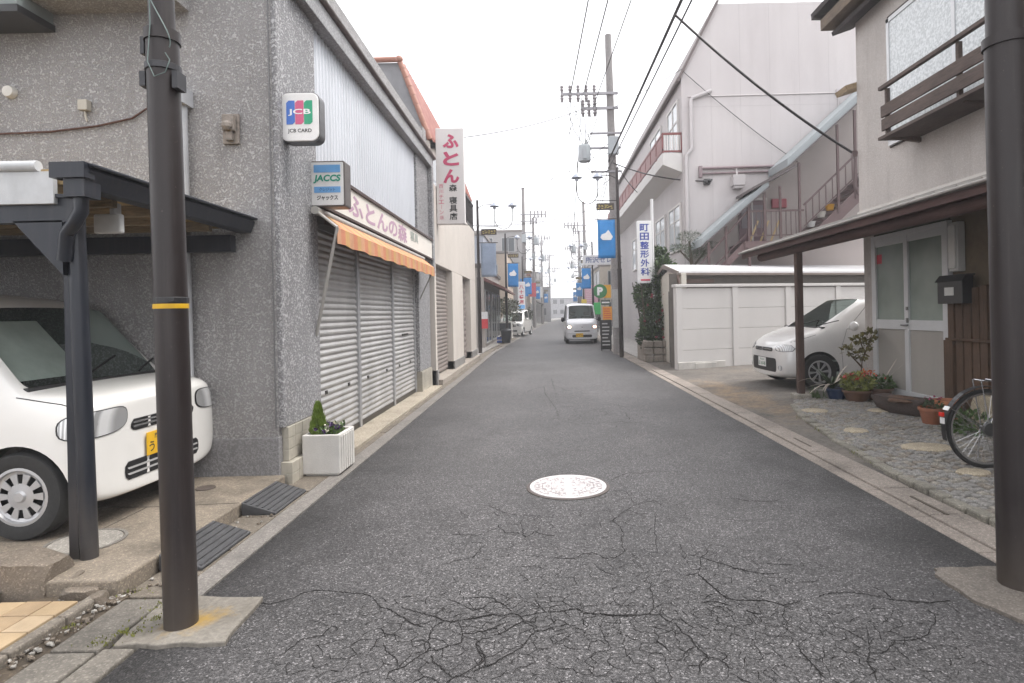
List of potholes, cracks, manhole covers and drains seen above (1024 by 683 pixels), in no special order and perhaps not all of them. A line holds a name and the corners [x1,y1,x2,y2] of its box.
manhole cover [527,475,610,500]
manhole cover [43,528,129,555]
crack [532,374,643,427]
crack [263,471,1002,683]
